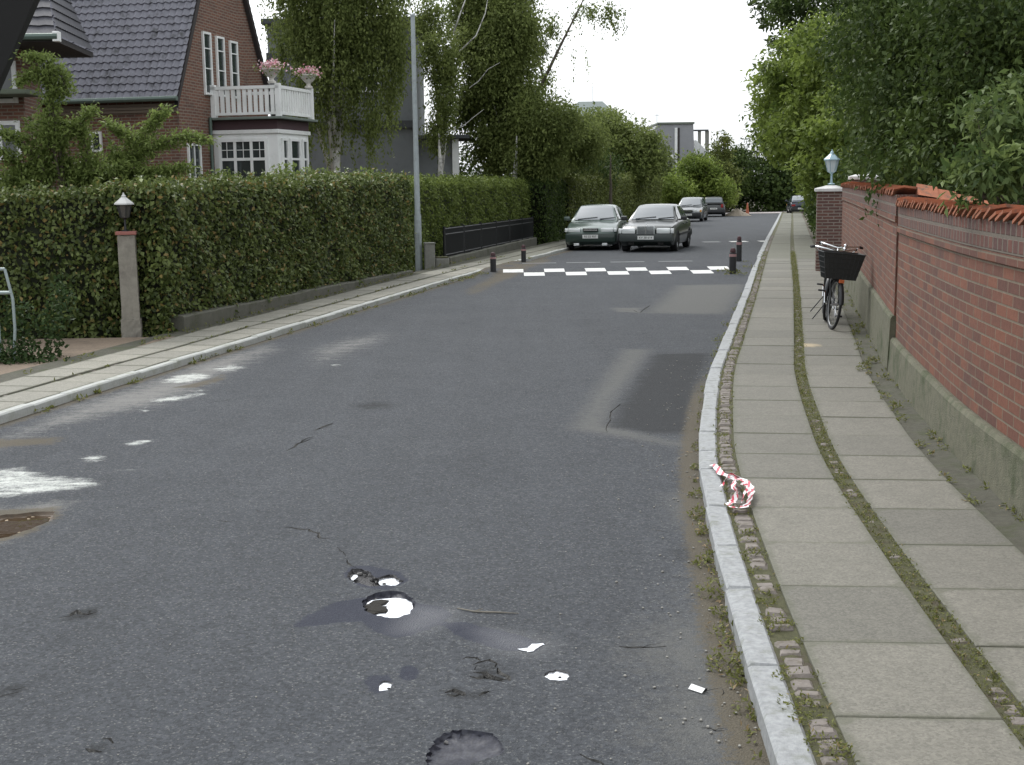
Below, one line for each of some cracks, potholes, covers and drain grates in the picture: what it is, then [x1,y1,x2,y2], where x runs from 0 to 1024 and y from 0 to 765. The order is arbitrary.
pothole [425,729,504,765]
pothole [378,681,394,691]
pothole [362,591,416,618]
crack [219,511,356,568]
crack [286,423,333,451]
pothole [544,669,570,680]
pothole [347,568,403,586]
